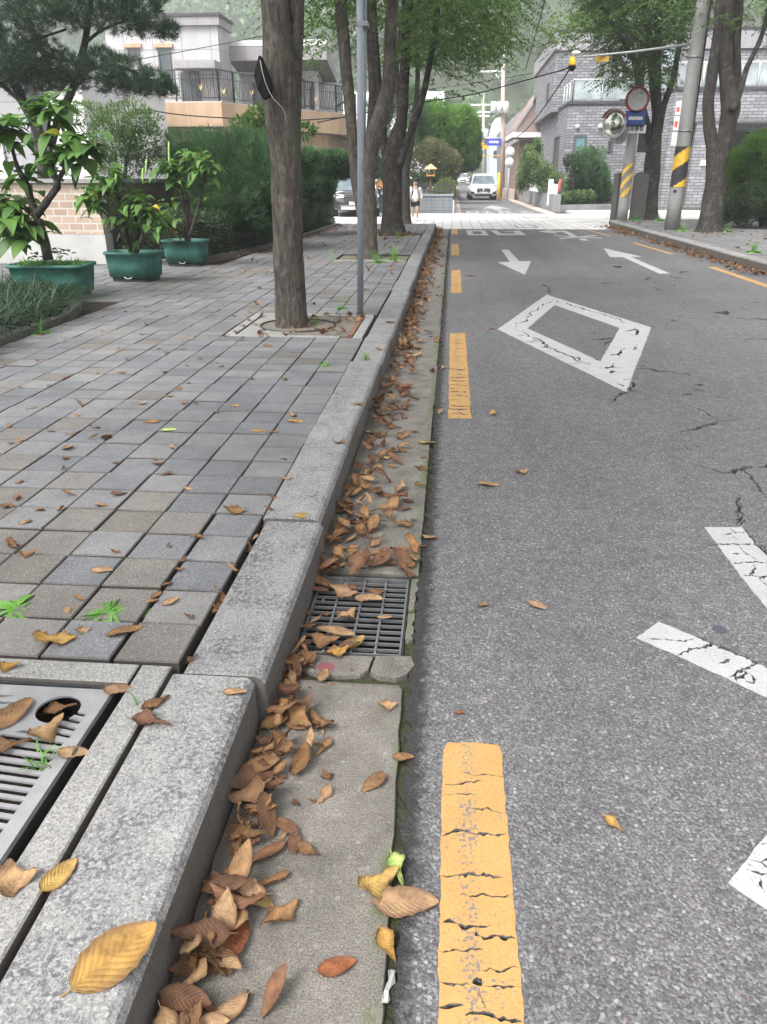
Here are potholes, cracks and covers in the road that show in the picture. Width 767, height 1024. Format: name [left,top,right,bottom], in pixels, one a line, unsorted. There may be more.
crack [732,465,767,574]
crack [446,921,508,941]
crack [444,1006,516,1023]
drain grate [295,575,411,660]
